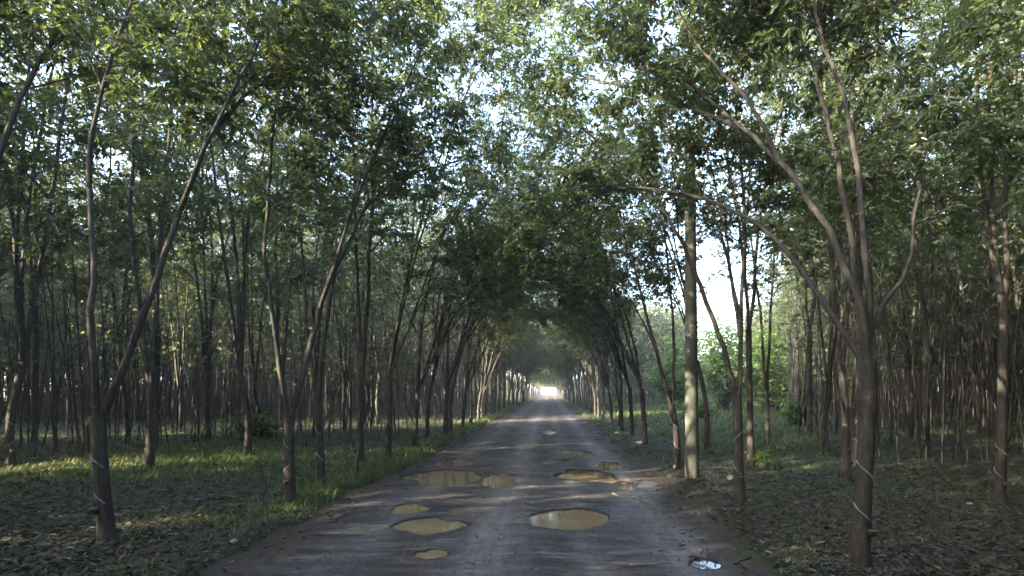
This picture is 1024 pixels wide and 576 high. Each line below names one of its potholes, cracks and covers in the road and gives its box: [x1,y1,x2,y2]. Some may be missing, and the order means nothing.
pothole [481,472,518,490]
pothole [562,450,594,458]
pothole [614,481,637,491]
pothole [434,458,476,468]
pothole [526,507,612,531]
pothole [389,516,471,536]
pothole [588,461,622,471]
pothole [550,469,620,484]
pothole [390,502,433,515]
pothole [398,469,485,487]
pothole [411,548,451,560]
